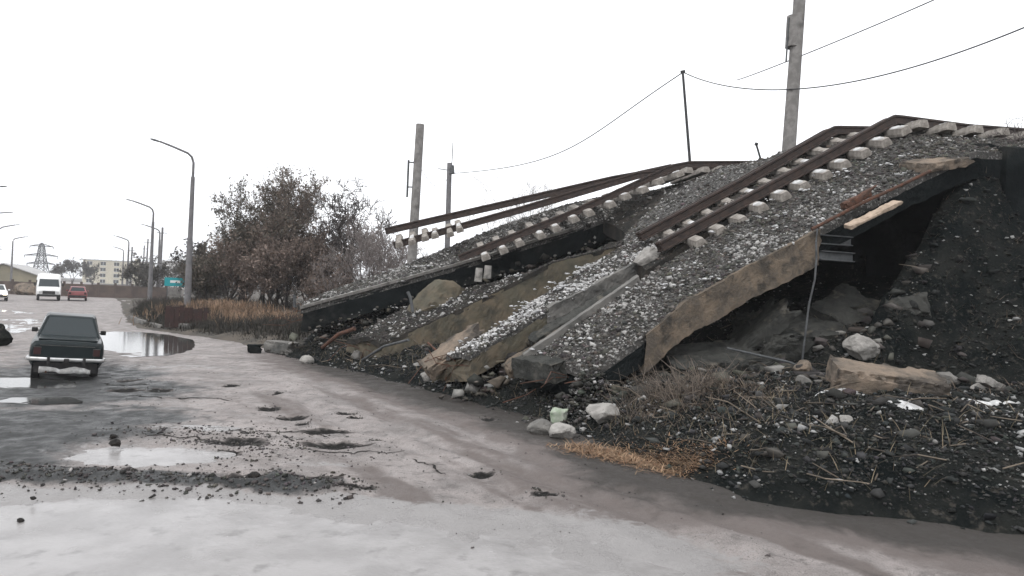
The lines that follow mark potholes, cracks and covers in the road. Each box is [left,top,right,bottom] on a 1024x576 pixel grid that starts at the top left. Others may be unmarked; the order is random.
pothole [299,441,375,450]
pothole [467,471,495,479]
crack [142,427,446,475]
pothole [199,437,270,446]
